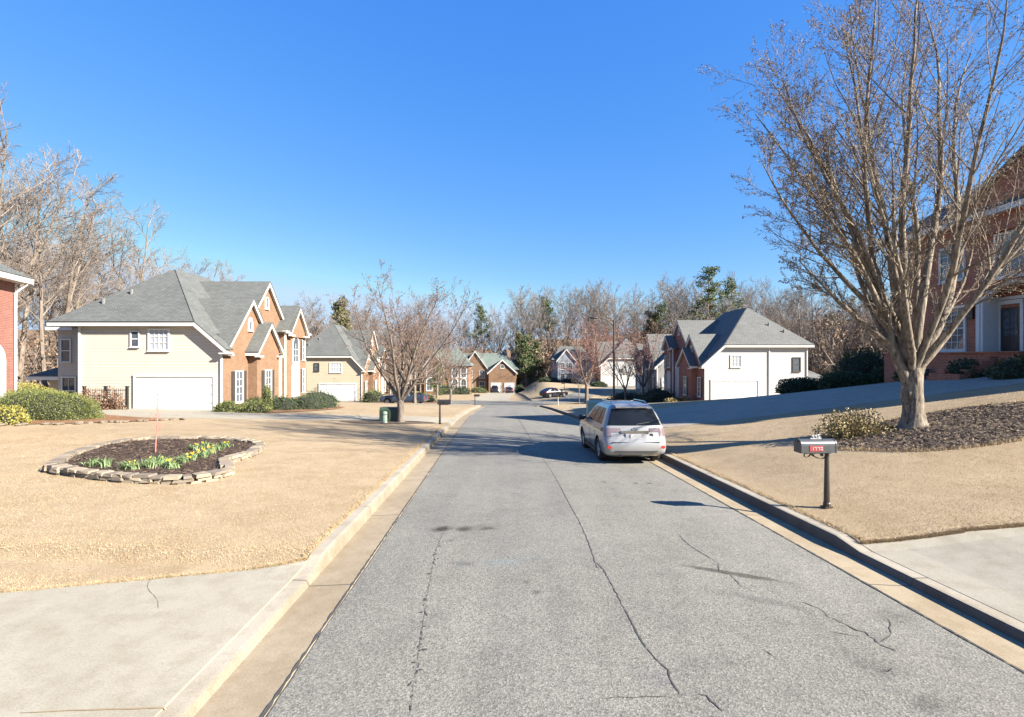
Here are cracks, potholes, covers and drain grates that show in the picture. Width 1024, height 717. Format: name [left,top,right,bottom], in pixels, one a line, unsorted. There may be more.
crack [408,533,444,711]
crack [803,602,895,650]
crack [543,459,681,699]
